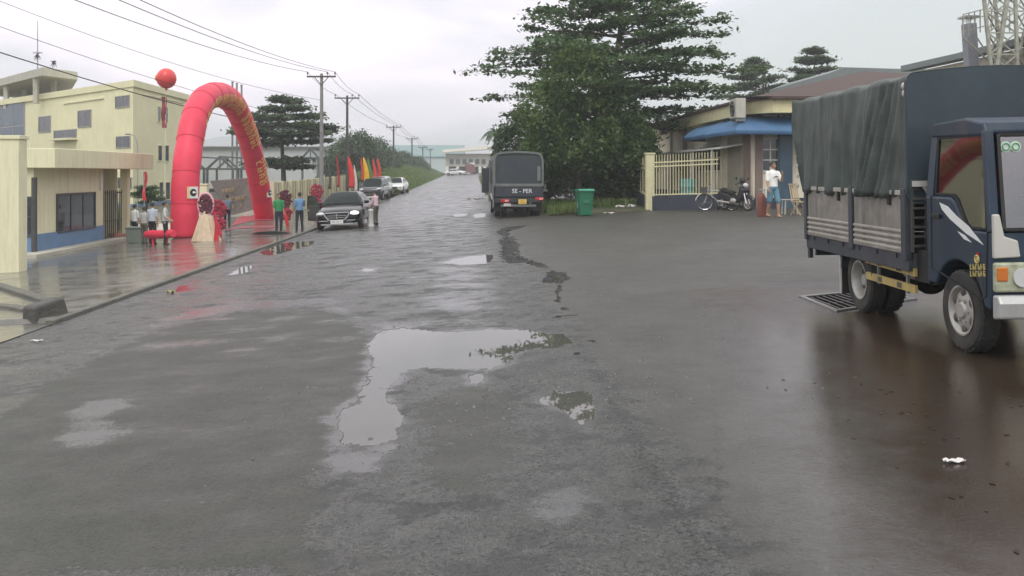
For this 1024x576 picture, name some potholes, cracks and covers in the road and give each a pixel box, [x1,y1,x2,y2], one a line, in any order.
pothole [336,327,575,447]
pothole [538,389,598,426]
